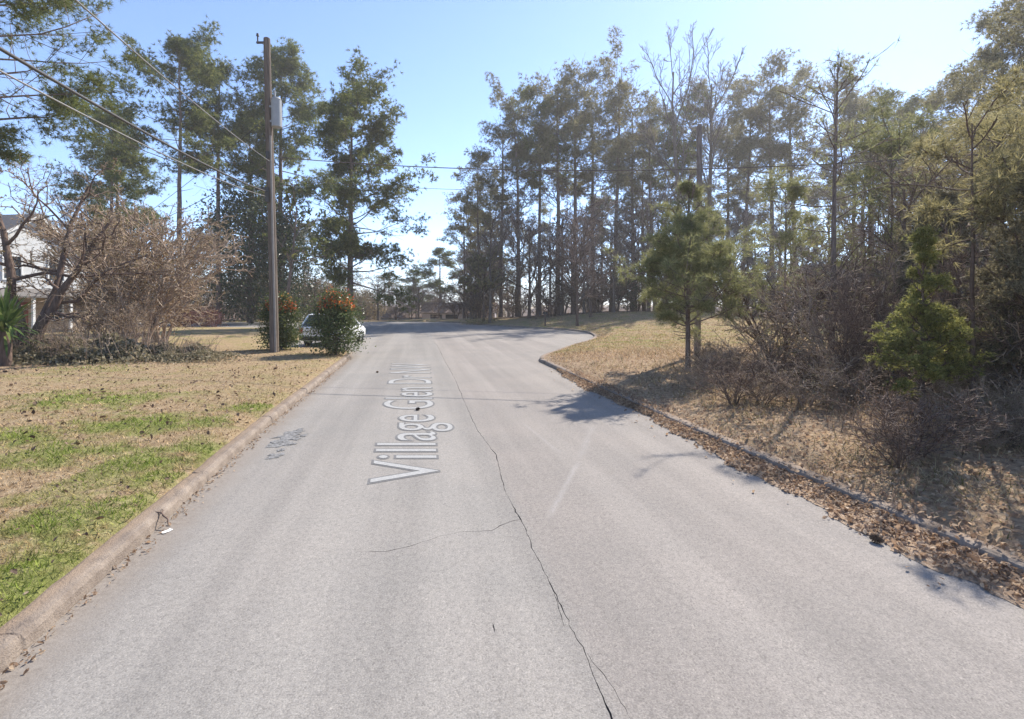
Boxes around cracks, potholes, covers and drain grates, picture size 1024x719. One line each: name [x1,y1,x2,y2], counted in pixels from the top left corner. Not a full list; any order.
crack [373,345,629,719]
